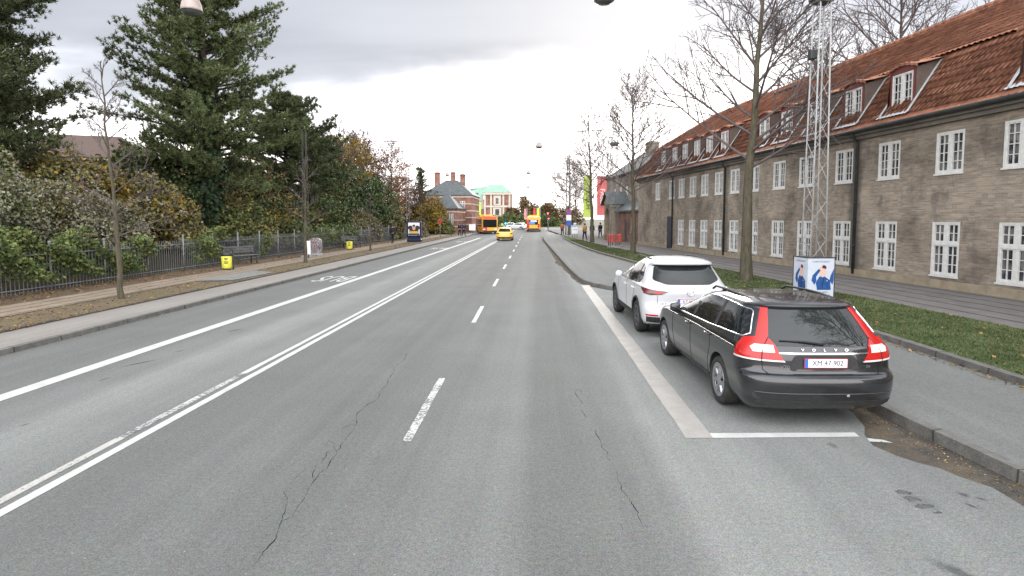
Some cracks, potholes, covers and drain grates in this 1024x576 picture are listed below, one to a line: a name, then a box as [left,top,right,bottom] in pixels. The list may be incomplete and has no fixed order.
crack [253,353,407,567]
crack [575,392,643,530]
